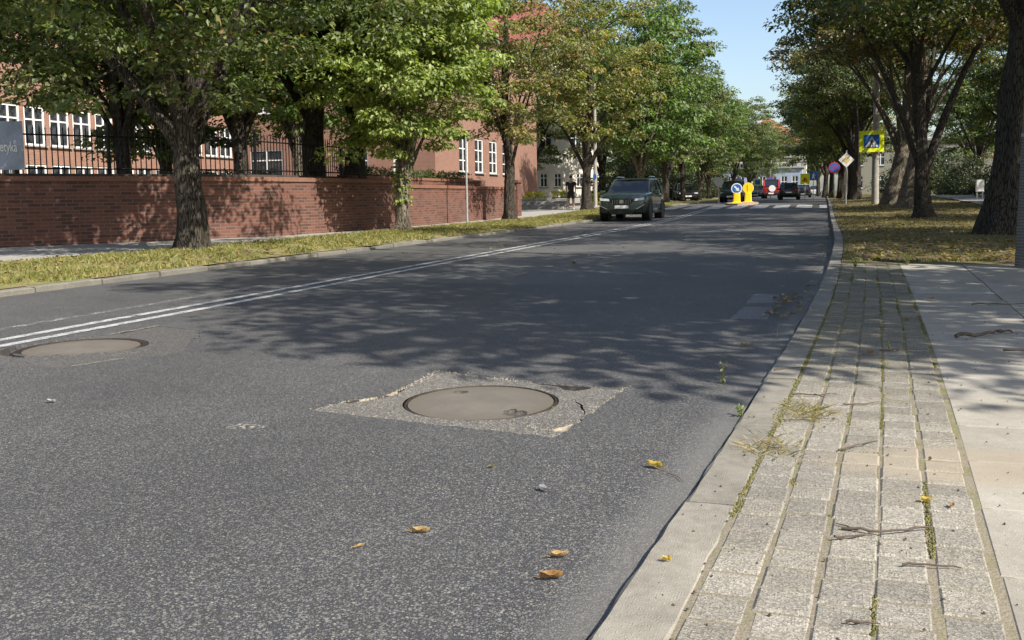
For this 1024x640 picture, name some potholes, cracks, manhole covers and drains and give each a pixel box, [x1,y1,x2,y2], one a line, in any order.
manhole cover [13,338,148,356]
manhole cover [404,385,558,420]
